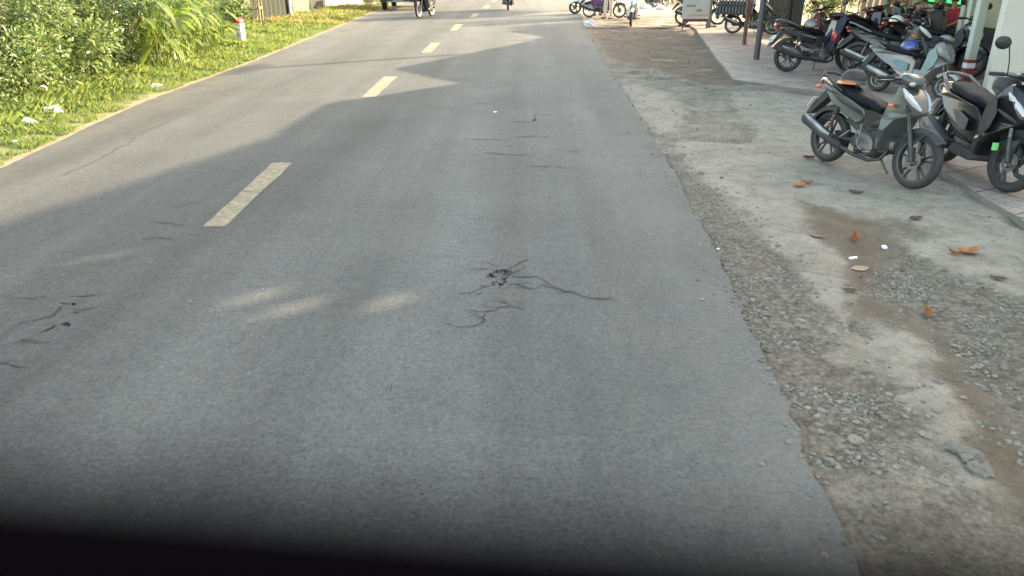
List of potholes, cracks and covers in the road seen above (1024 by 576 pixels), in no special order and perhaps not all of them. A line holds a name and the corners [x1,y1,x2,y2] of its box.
crack [143,202,192,240]
pothole [485,269,512,287]
crack [60,116,179,176]
crack [0,291,111,368]
crack [468,107,577,169]
crack [437,259,615,327]
